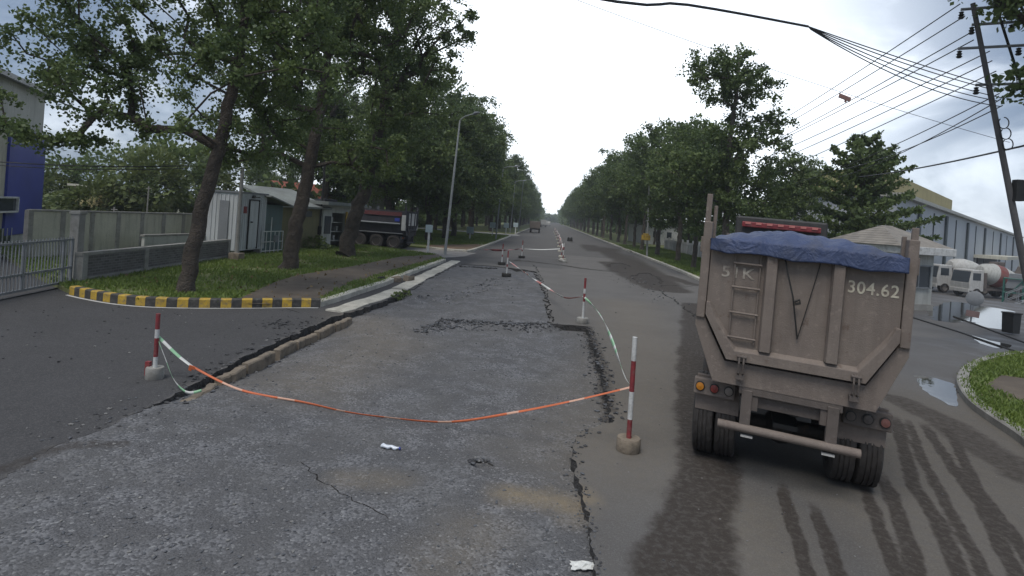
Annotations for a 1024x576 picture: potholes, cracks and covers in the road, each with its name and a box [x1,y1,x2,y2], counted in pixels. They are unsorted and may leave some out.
pothole [471,461,493,469]
crack [300,461,388,518]
